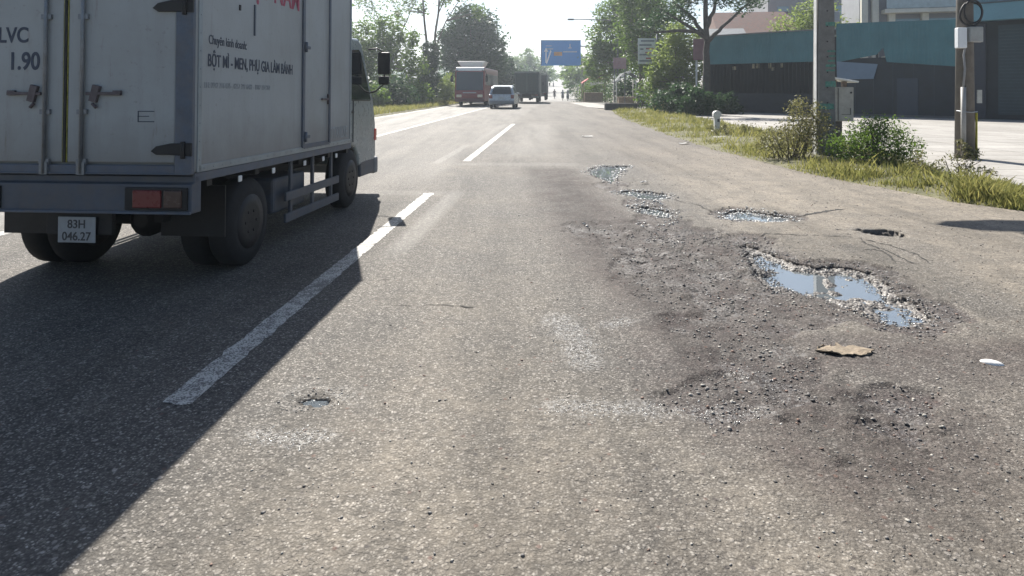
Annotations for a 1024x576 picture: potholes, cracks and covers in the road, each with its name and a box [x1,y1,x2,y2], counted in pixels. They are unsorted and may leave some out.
pothole [621,192,667,200]
pothole [589,167,627,184]
crack [620,208,928,317]
pothole [743,246,930,329]
pothole [726,212,790,222]
